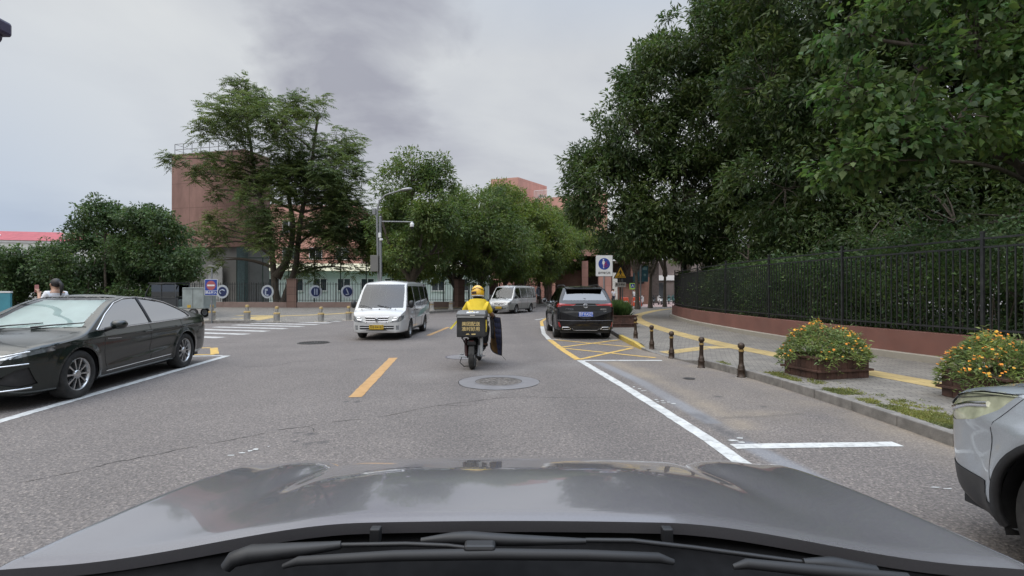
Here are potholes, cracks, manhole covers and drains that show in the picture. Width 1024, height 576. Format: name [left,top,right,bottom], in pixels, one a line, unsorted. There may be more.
manhole cover [458,375,540,390]
crack [25,390,593,482]
